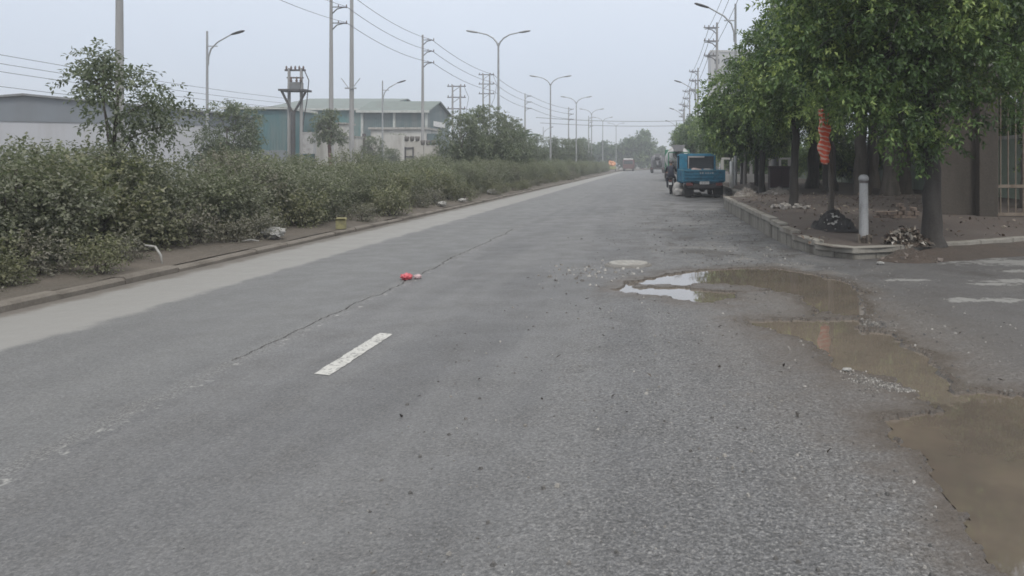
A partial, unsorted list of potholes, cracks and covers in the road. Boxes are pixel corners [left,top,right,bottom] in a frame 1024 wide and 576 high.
crack [231,240,491,361]
pothole [883,391,1024,570]
pothole [745,317,956,397]
pothole [611,266,868,315]
manhole cover [604,260,652,269]
